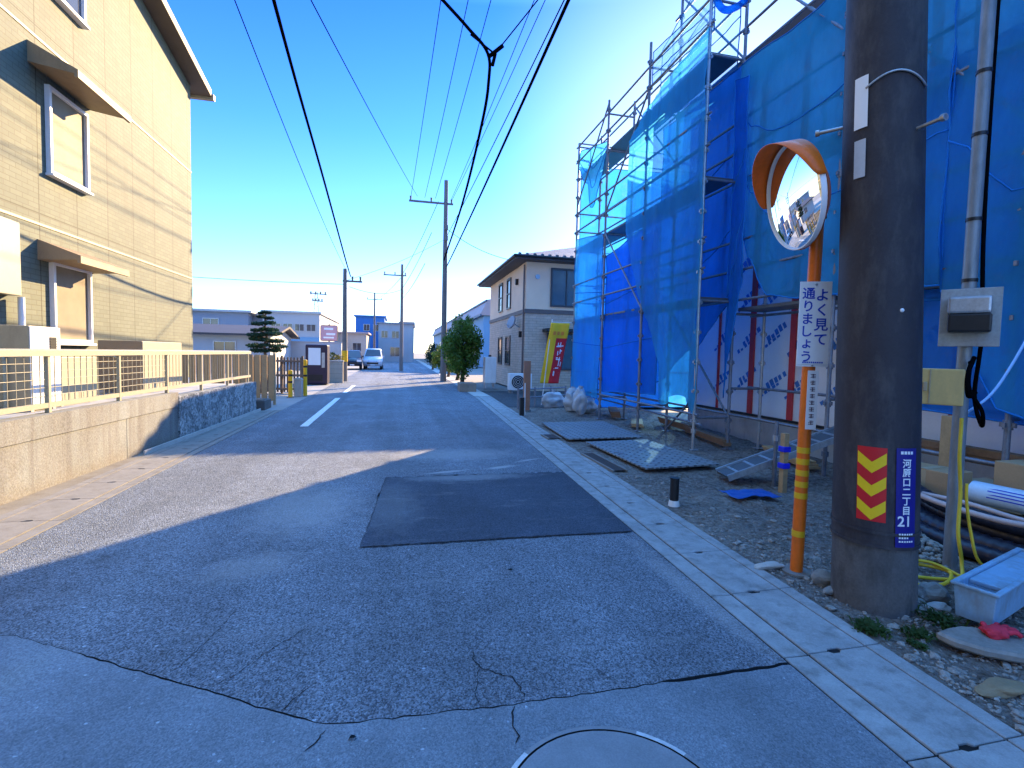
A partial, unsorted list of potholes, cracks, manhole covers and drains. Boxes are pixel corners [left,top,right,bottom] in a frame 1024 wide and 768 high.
manhole cover [511,726,706,768]
crack [0,612,788,751]
